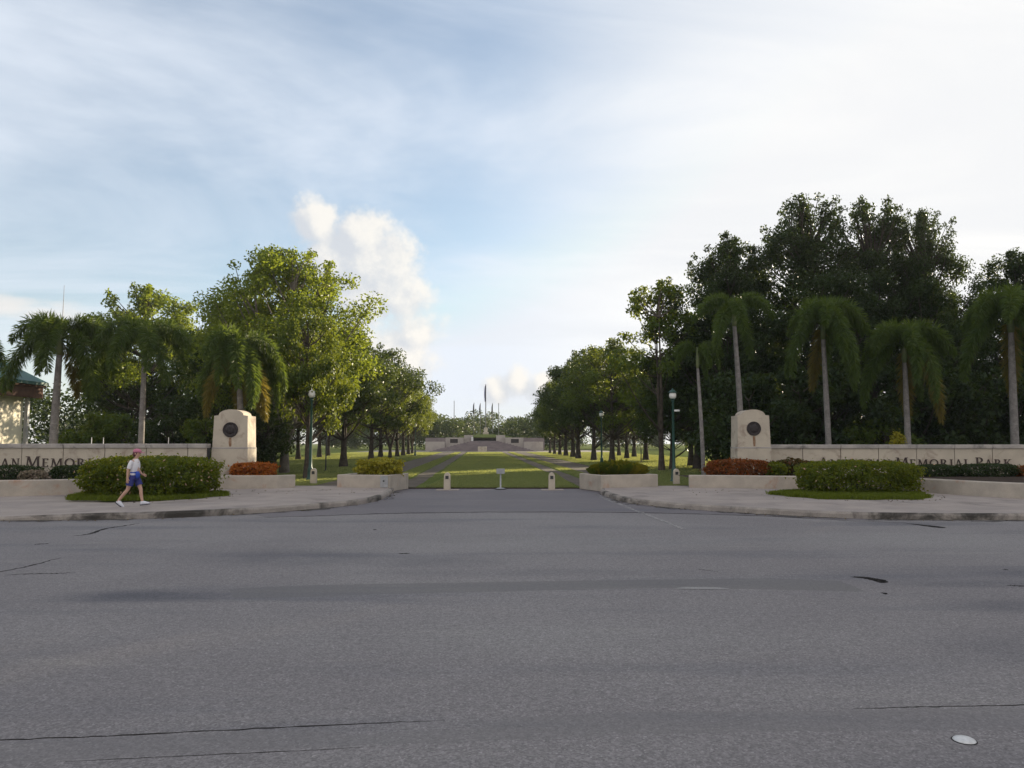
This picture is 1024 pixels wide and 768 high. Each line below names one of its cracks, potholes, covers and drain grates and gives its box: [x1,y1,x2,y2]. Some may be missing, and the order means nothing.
crack [0,543,76,575]
crack [0,720,438,741]
crack [69,747,360,762]
crack [76,523,138,536]
